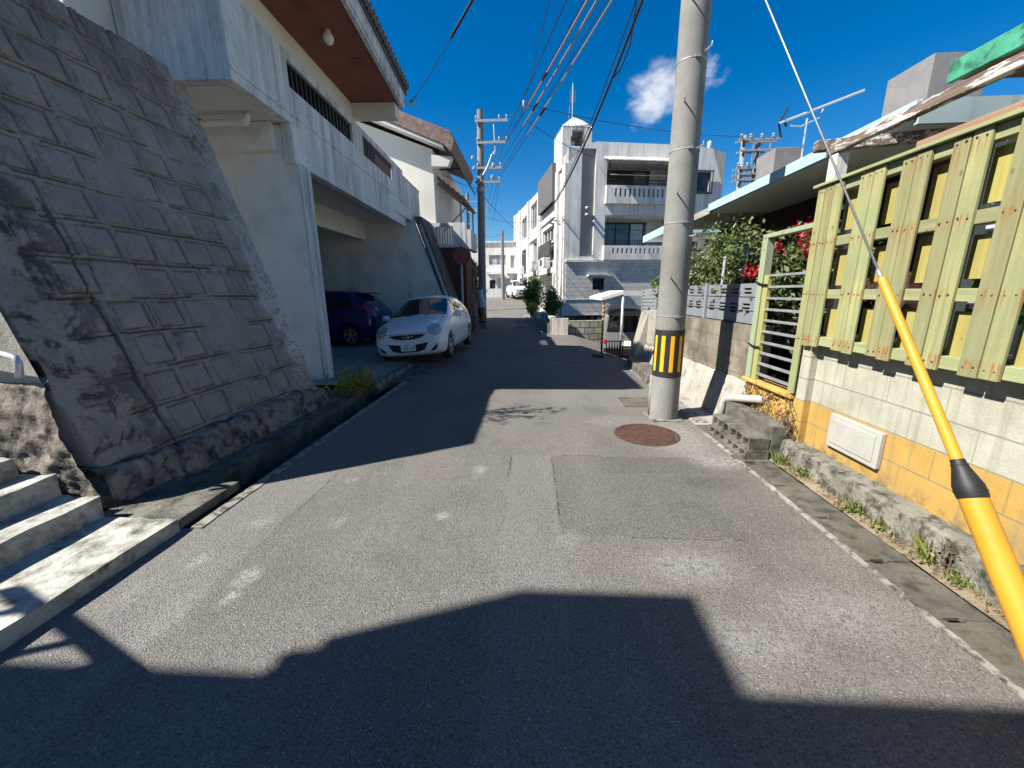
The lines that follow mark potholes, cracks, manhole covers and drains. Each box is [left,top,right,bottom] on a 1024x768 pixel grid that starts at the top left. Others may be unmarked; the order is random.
manhole cover [614,424,680,446]
